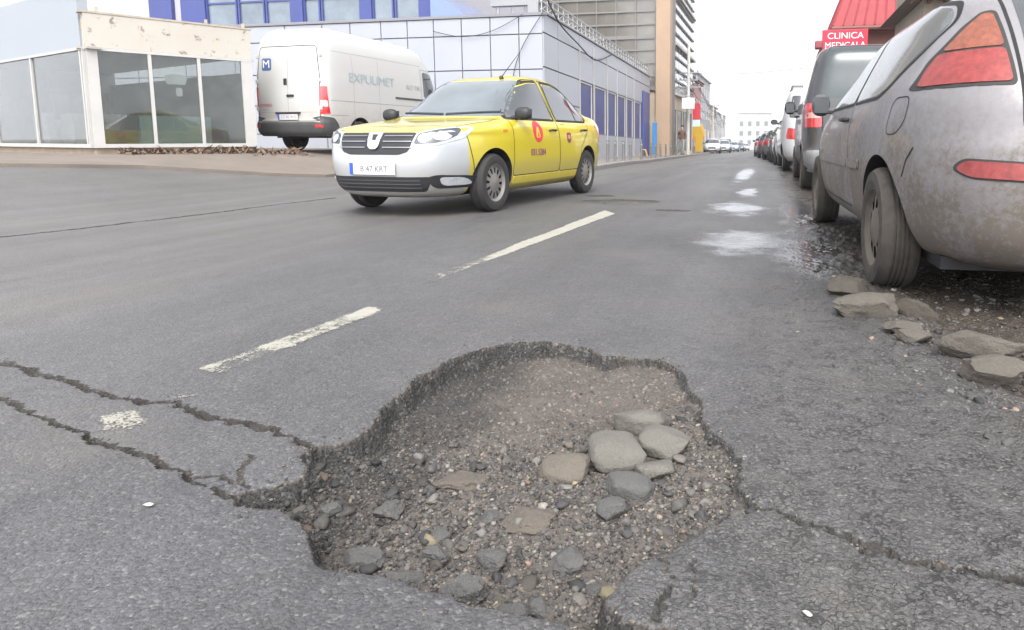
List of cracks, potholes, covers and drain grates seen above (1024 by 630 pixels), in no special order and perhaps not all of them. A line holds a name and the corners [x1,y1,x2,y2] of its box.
crack [0,361,317,506]
pothole [232,340,763,630]
crack [760,507,1024,587]
